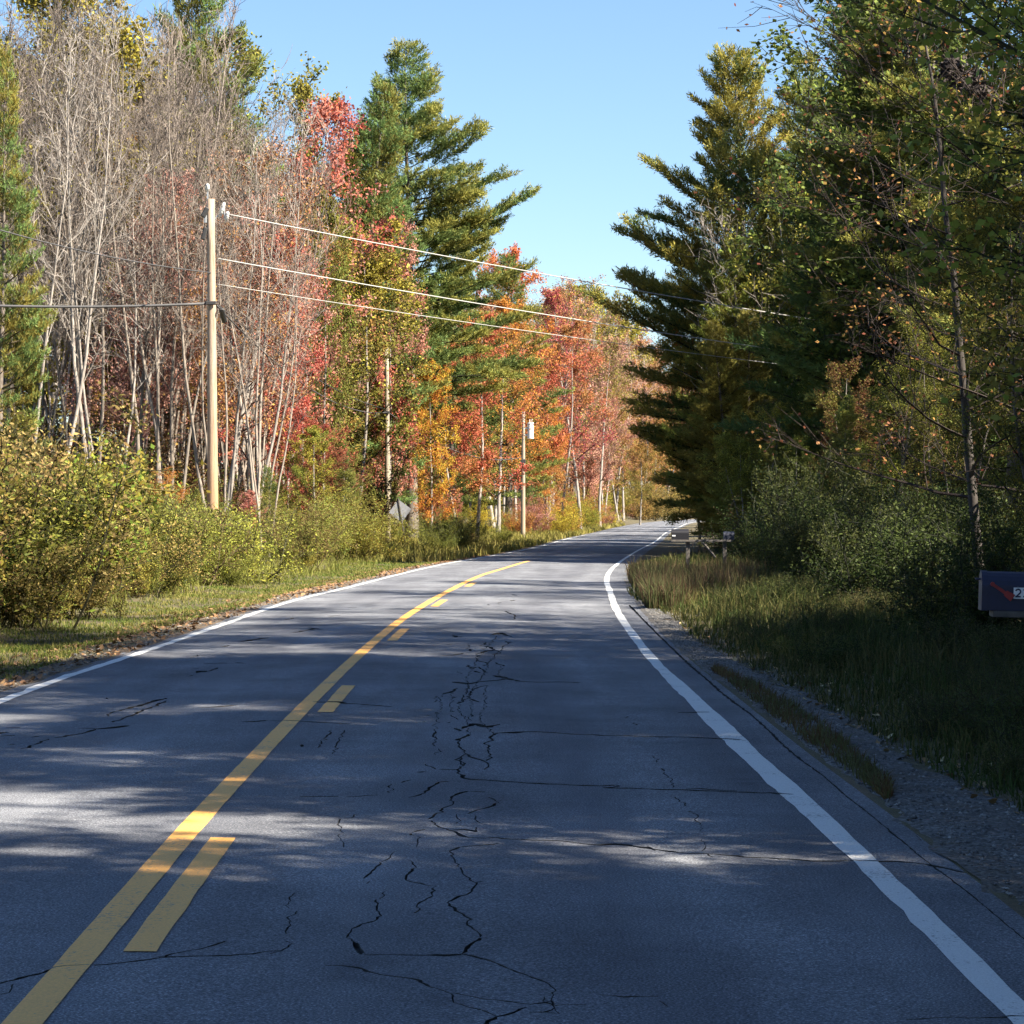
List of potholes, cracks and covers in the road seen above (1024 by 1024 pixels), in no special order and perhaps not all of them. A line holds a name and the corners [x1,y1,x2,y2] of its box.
crack [325,600,1024,1024]
crack [0,698,167,749]
crack [203,705,345,754]
